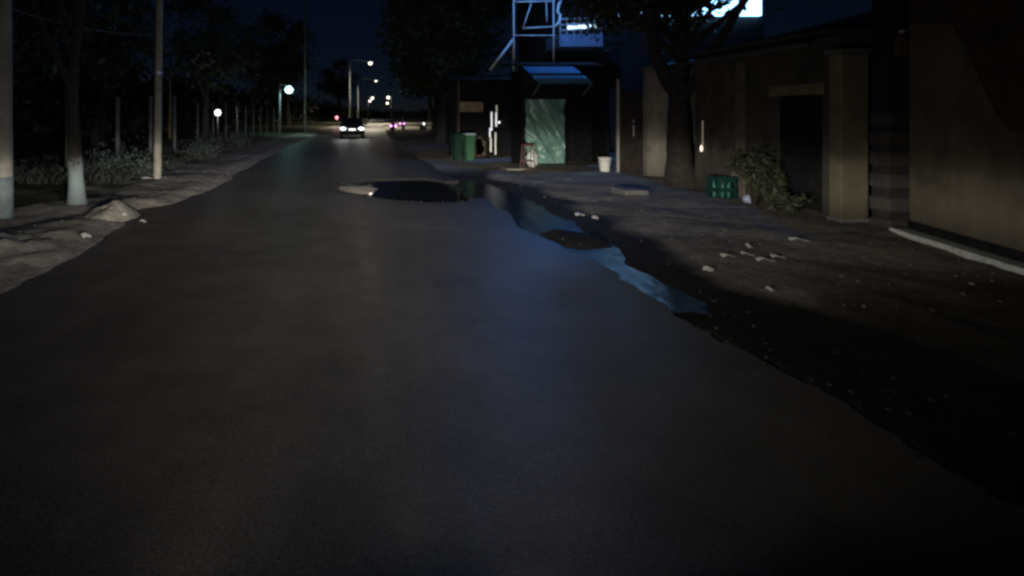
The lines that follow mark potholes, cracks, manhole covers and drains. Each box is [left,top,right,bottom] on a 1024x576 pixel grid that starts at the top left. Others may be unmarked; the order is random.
pothole [335,178,473,203]
